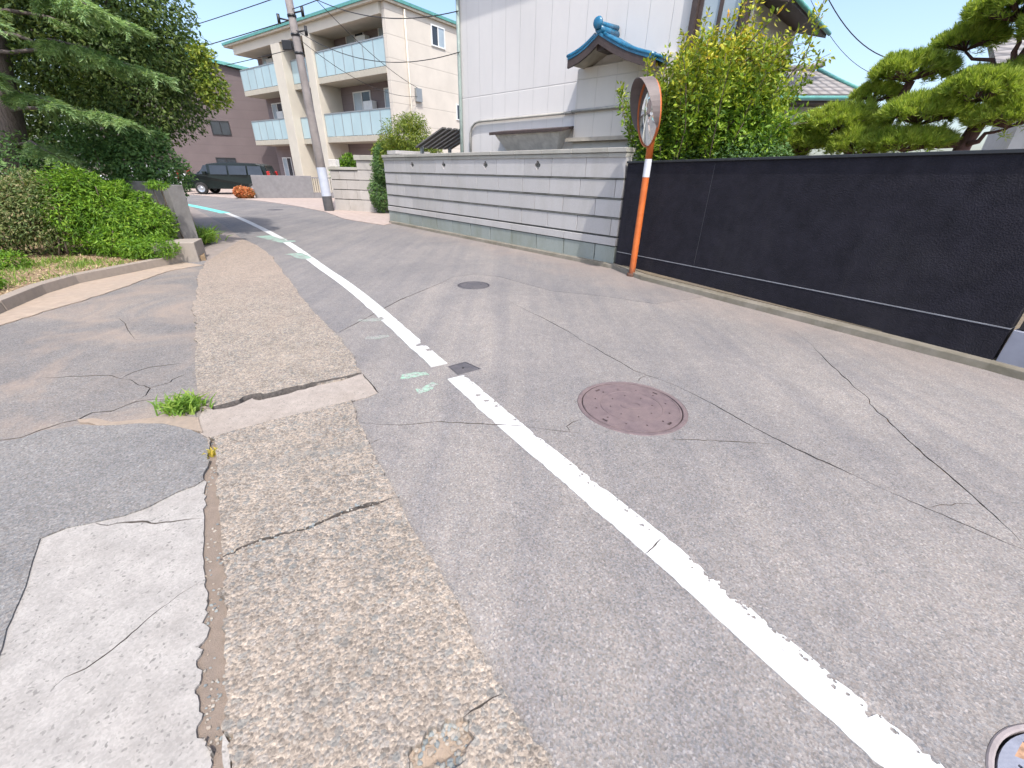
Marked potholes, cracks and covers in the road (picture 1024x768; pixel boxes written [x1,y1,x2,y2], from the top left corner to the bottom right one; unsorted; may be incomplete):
crack [0,363,186,441]
utility cover [448,362,481,375]
manhole cover [577,382,688,436]
crack [366,304,1022,549]
manhole cover [985,723,1024,768]
pothole [407,717,475,768]
manhole cover [457,281,490,289]
